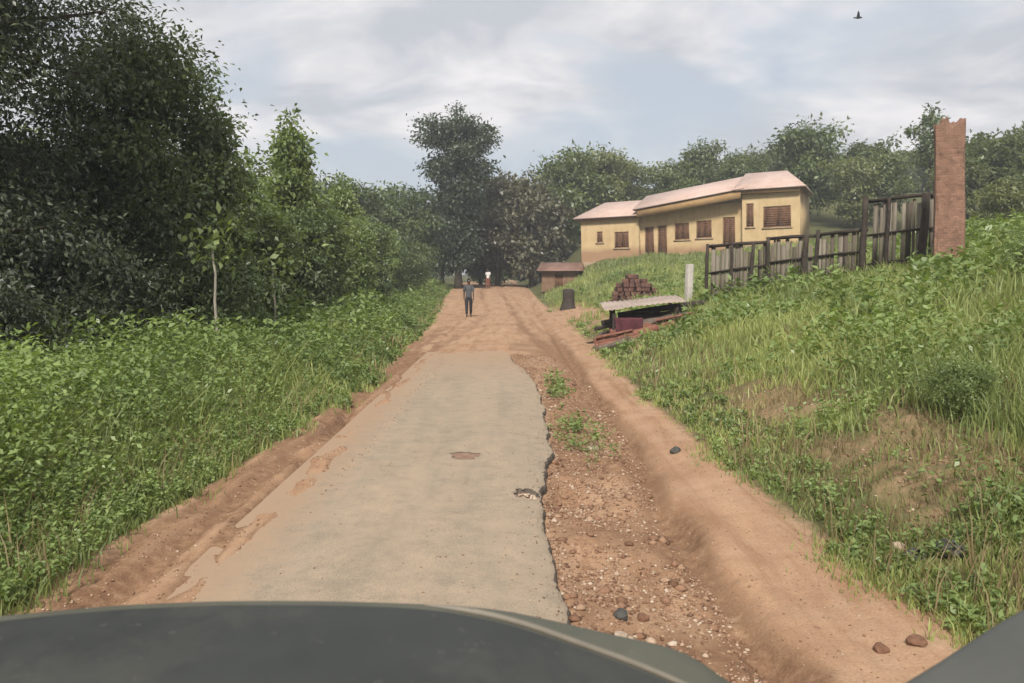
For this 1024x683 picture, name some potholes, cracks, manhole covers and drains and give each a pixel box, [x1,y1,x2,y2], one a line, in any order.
pothole [449,451,483,460]
pothole [511,487,542,500]
